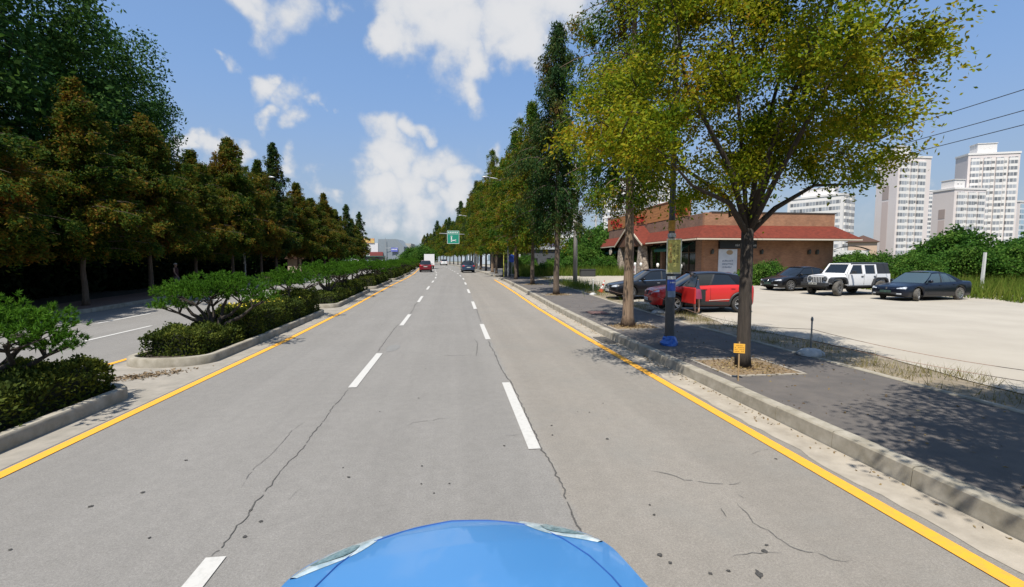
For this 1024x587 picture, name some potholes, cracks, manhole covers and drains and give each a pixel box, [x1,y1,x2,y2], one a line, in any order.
crack [656,471,849,561]
crack [211,393,345,556]
